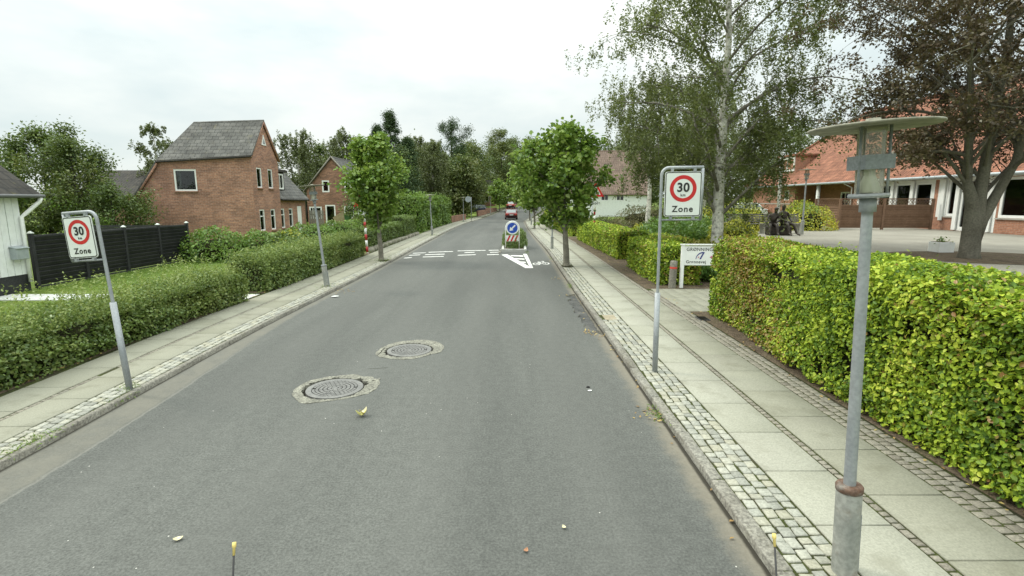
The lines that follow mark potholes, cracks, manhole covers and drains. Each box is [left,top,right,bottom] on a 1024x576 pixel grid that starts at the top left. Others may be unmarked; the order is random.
manhole cover [387,344,432,357]
manhole cover [305,379,364,400]
